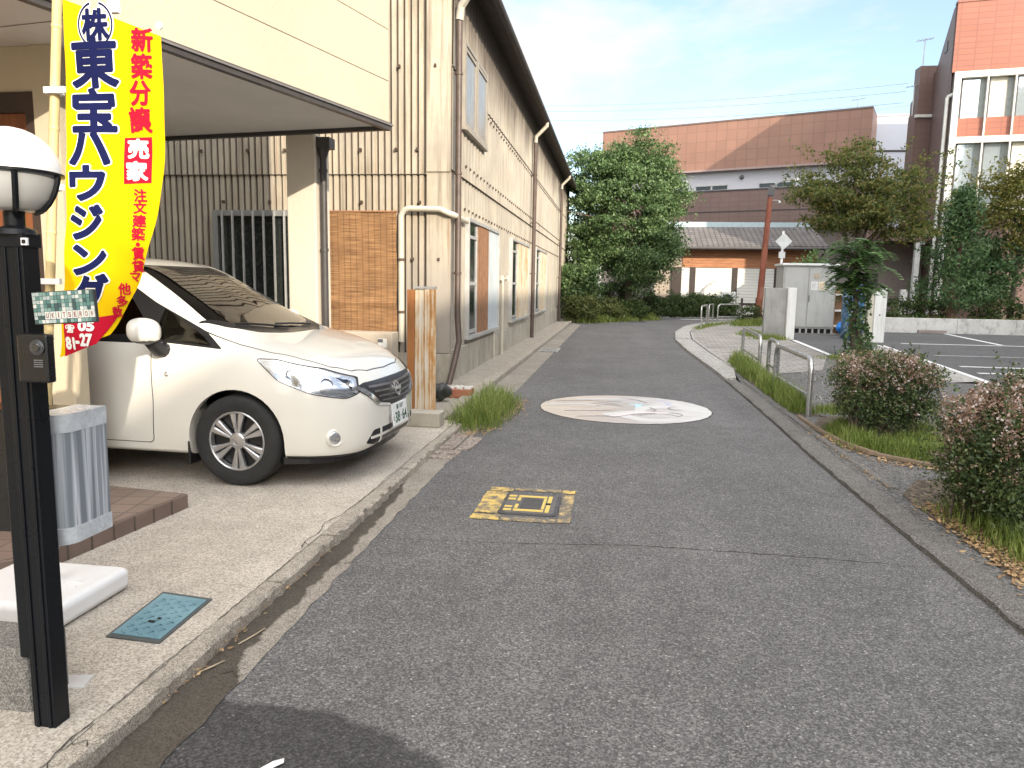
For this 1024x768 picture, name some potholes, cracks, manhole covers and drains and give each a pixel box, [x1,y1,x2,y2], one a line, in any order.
manhole cover [498,493,561,517]
